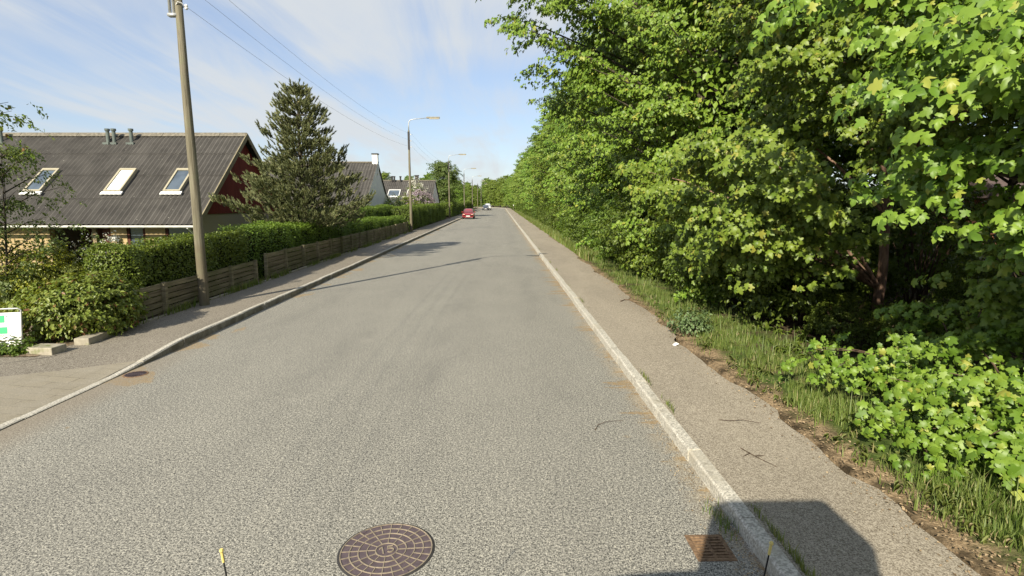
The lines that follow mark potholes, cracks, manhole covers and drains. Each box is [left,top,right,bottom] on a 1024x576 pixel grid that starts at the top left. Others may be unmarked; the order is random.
manhole cover [337,523,435,576]
drain grate [684,534,738,562]
